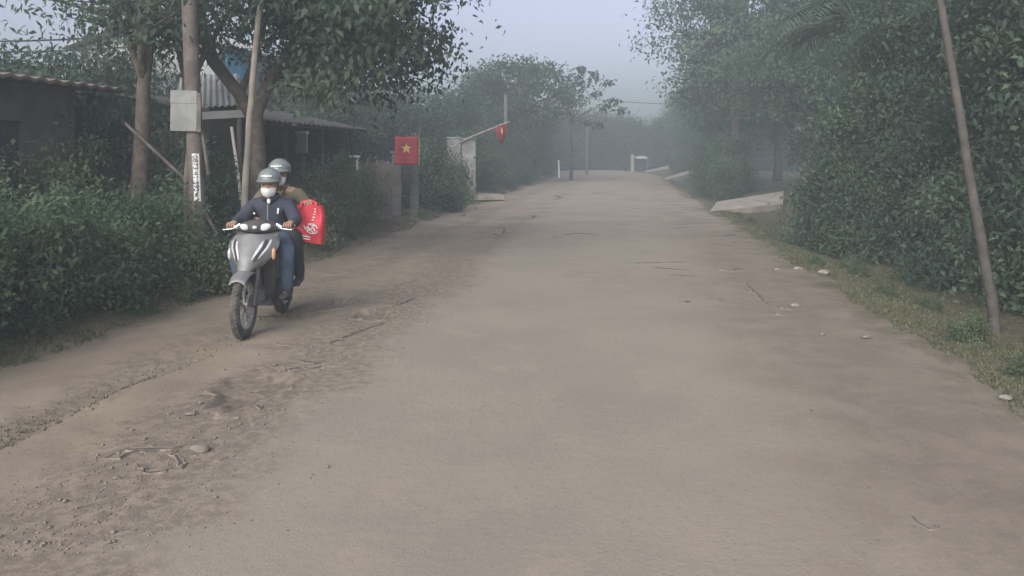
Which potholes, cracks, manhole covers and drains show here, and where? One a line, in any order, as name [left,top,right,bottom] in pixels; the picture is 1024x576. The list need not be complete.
crack [396,298,417,306]
crack [490,194,600,240]
crack [706,234,792,317]
crack [624,262,694,277]
